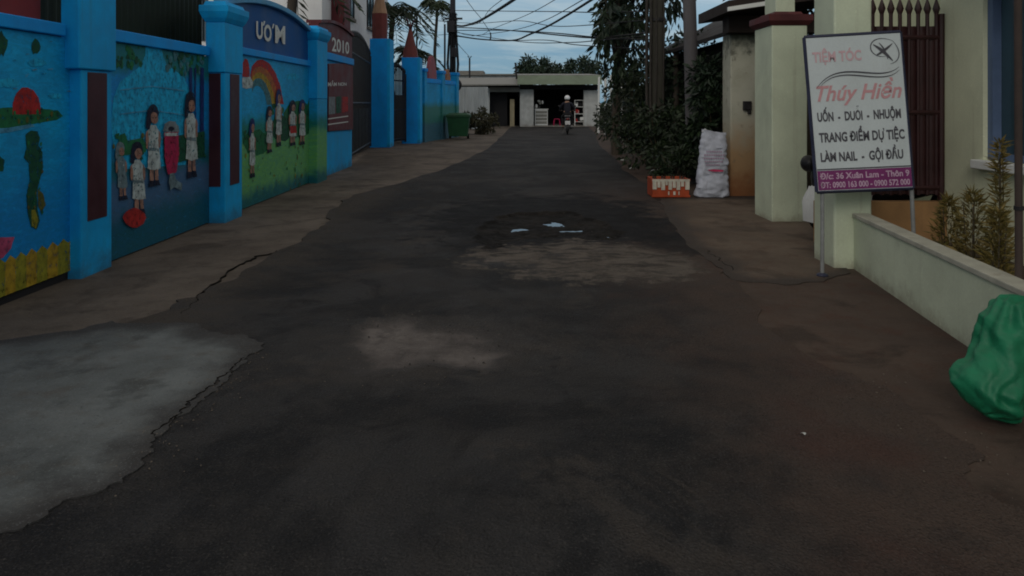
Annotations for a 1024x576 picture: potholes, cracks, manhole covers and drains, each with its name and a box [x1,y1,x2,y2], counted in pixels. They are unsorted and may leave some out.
crack [151,357,244,435]
crack [180,250,277,314]
